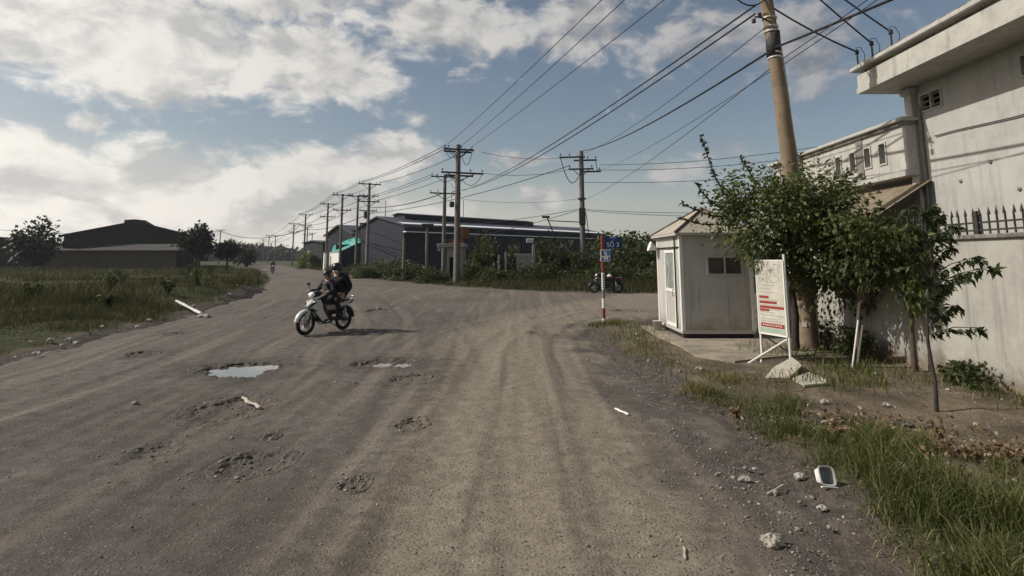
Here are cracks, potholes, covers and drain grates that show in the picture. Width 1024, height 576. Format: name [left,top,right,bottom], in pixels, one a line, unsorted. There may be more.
pothole [203,447,304,483]
pothole [159,392,282,429]
pothole [380,371,448,387]
pothole [115,440,186,463]
pothole [391,417,432,433]
pothole [332,474,374,494]
pothole [119,350,173,359]
pothole [338,357,437,370]
pothole [185,360,293,381]
pothole [259,431,283,442]
